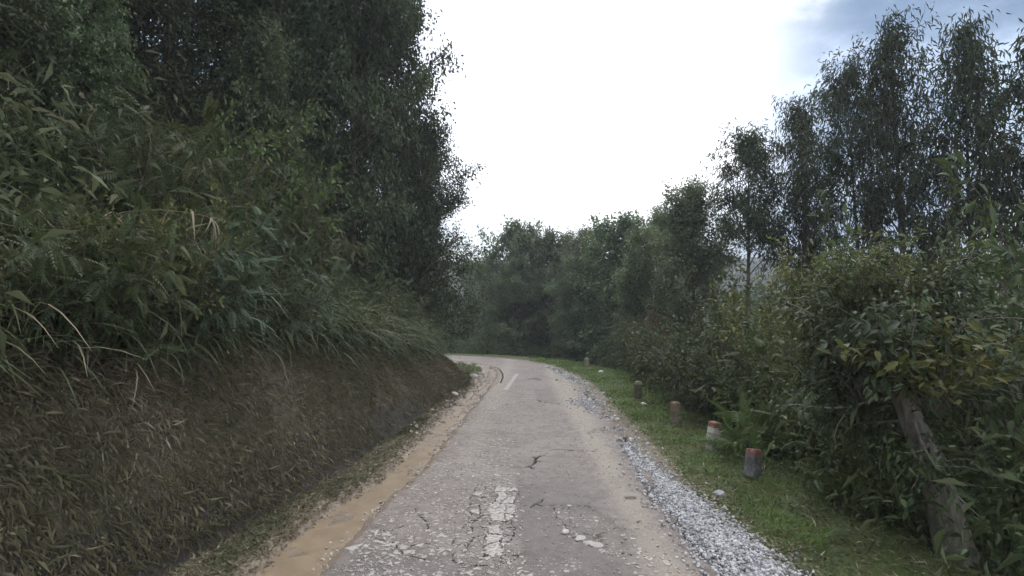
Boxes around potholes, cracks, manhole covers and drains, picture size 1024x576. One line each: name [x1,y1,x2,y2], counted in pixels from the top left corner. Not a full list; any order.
crack [375,509,431,561]
crack [452,487,519,566]
crack [530,499,632,556]
